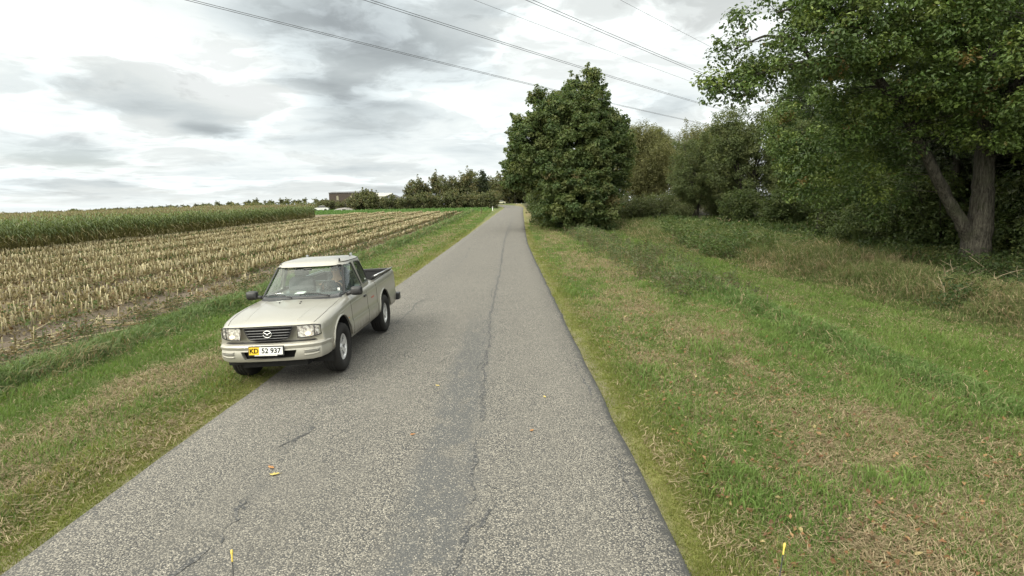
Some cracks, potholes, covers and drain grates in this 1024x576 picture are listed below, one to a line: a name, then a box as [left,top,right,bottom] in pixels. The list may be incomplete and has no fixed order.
crack [446,441,499,576]
crack [476,220,512,421]
crack [168,425,314,576]
